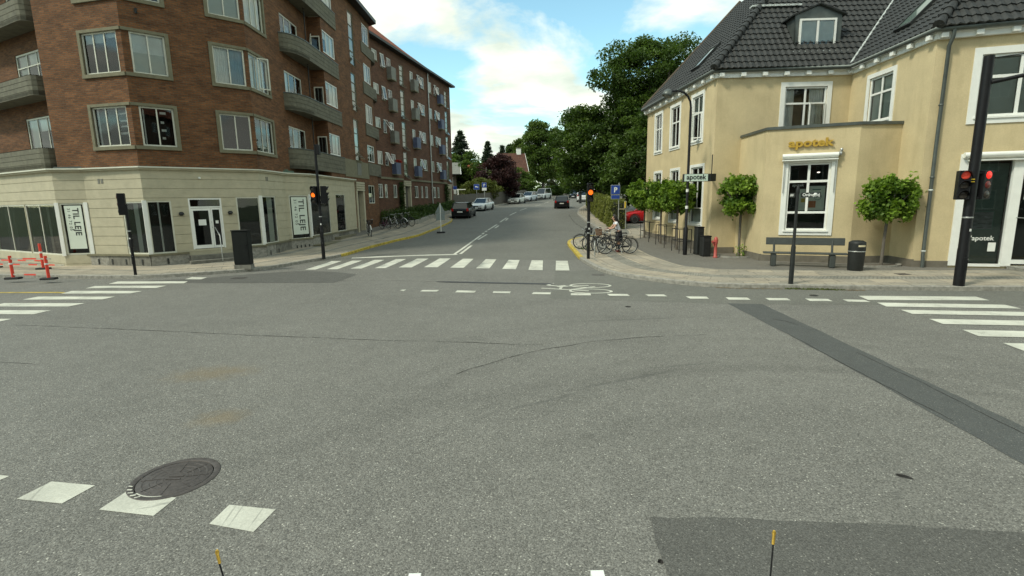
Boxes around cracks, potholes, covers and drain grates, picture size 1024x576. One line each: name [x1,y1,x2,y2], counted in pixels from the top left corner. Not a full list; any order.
manhole cover [126,458,221,501]
